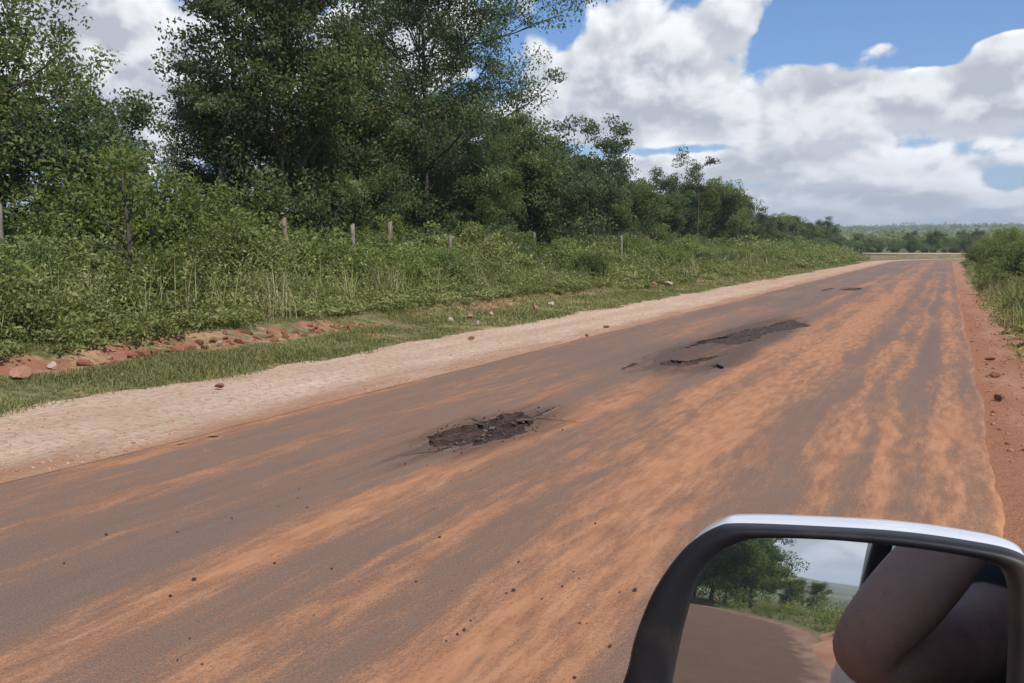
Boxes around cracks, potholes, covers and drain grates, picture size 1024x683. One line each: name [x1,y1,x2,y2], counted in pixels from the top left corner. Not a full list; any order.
crack [514,406,578,423]
pothole [652,352,728,368]
pothole [419,406,555,453]
crack [402,442,473,457]
pothole [671,319,818,352]
